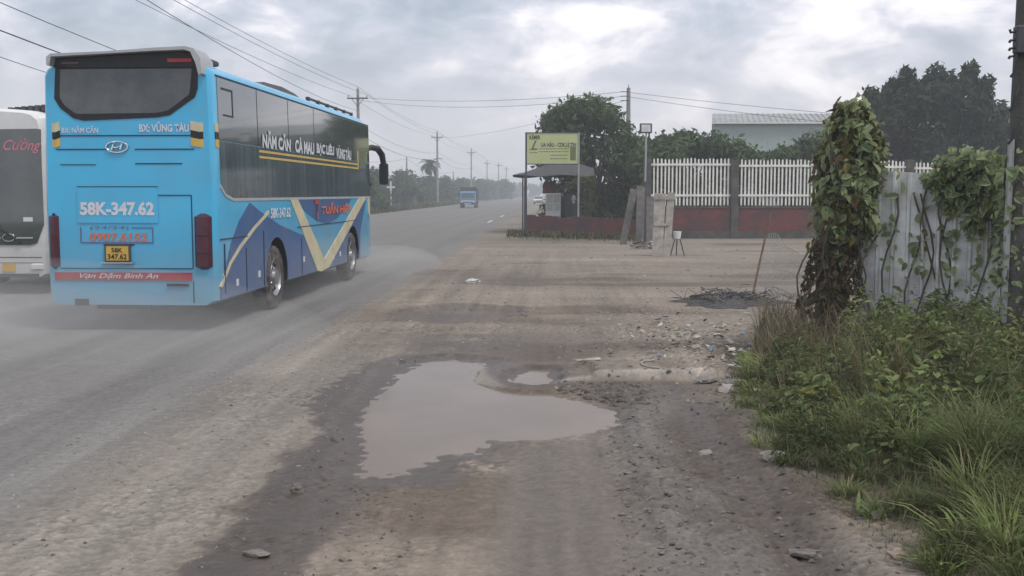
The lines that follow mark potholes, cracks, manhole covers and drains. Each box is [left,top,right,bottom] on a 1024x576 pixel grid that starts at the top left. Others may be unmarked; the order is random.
pothole [314,353,657,486]
